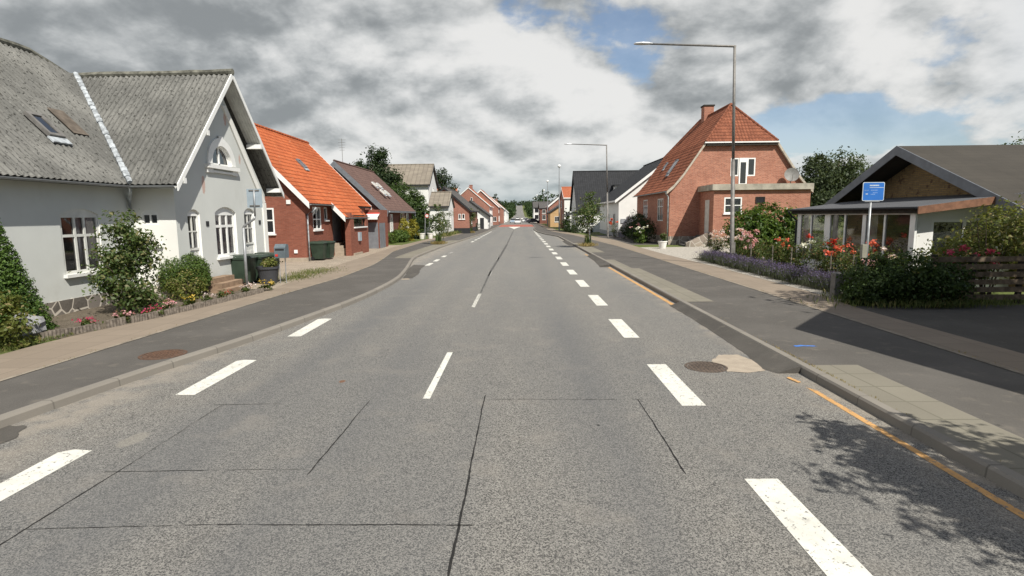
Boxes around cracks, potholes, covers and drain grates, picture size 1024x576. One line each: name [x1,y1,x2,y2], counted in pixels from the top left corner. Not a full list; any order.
manhole cover [138,349,188,360]
manhole cover [684,361,728,373]
